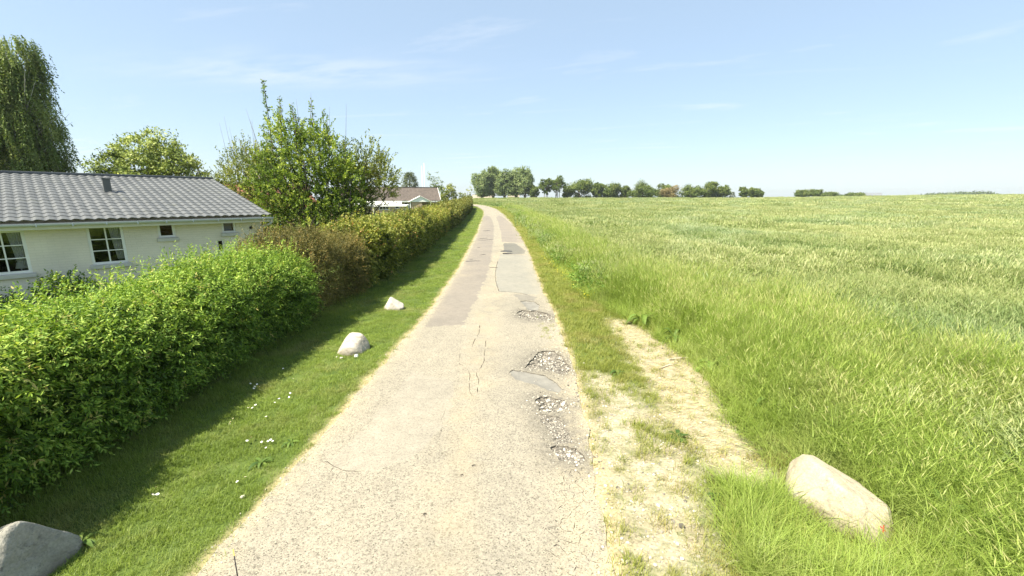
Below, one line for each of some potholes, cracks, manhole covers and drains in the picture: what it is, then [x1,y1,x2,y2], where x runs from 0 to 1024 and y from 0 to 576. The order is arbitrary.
crack [543,469,598,570]
pothole [510,309,557,322]
pothole [521,390,579,415]
pothole [512,347,581,379]
pothole [546,441,601,476]
